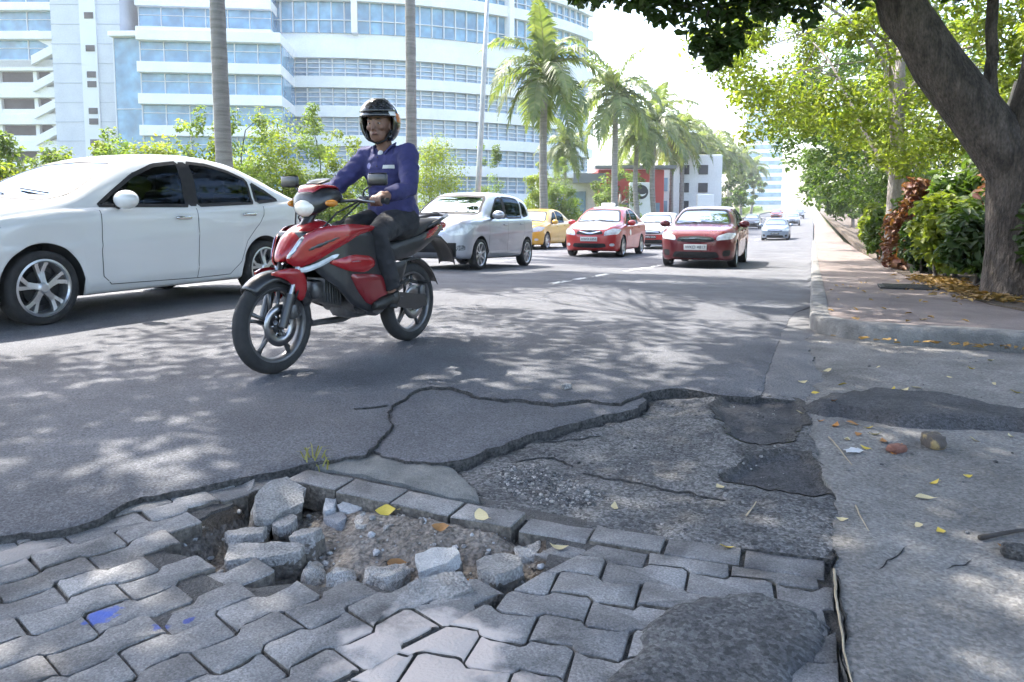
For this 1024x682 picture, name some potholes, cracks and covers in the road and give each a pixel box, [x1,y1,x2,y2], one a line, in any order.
crack [353,386,761,501]
pothole [181,505,546,588]
